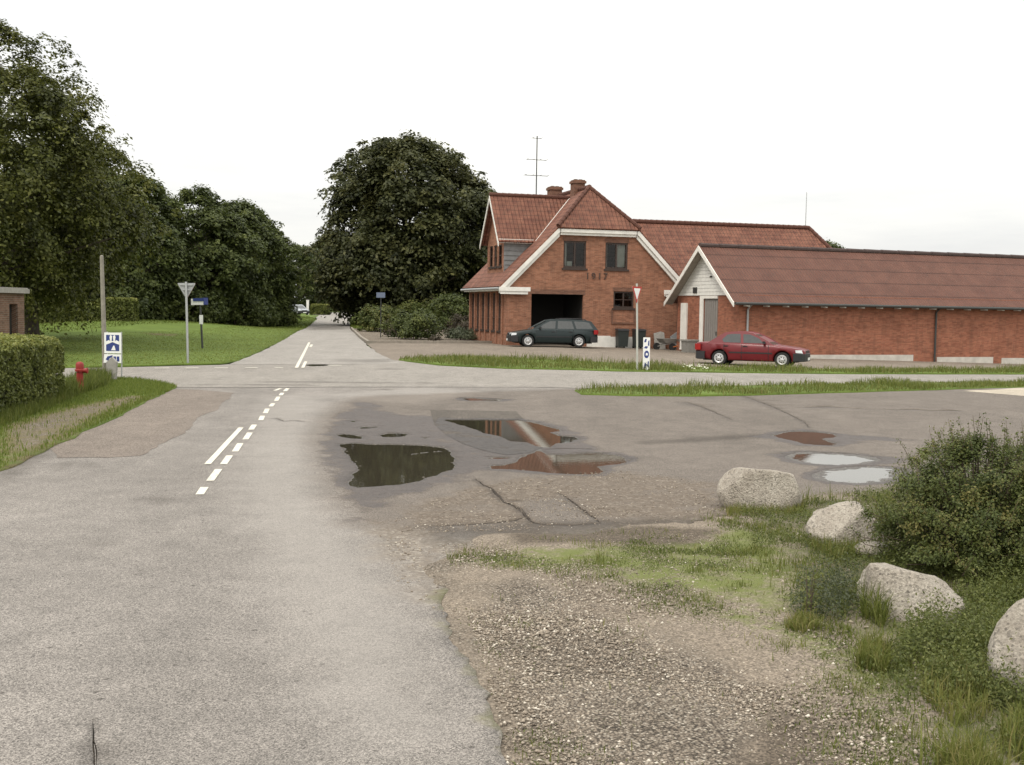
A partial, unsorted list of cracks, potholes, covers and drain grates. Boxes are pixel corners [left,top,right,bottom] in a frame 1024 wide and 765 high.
pothole [770,430,839,446]
pothole [339,443,460,488]
crack [436,479,600,527]
pothole [443,419,578,448]
pothole [489,449,631,475]
pothole [812,466,902,484]
pothole [785,452,881,465]
